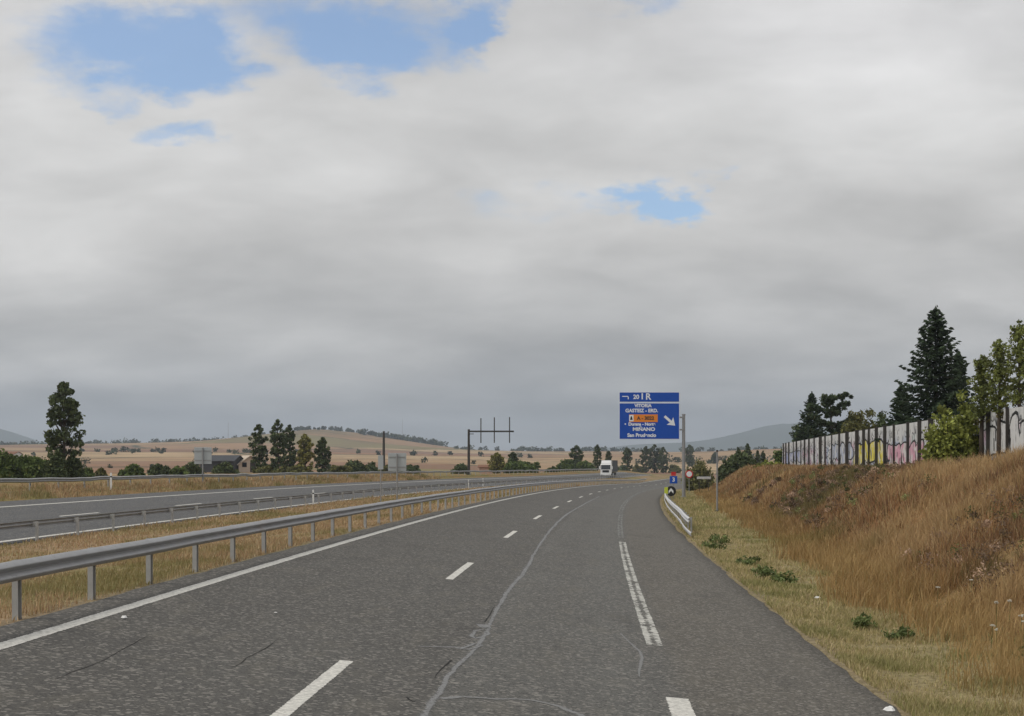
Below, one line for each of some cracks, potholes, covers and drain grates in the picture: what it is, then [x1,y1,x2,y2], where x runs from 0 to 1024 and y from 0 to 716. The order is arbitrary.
crack [620,633,644,677]
